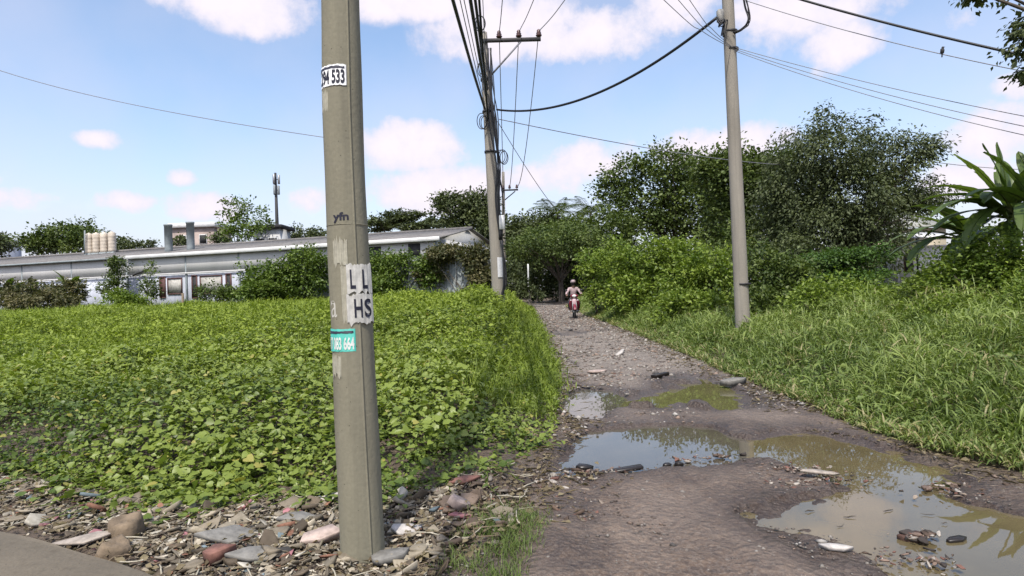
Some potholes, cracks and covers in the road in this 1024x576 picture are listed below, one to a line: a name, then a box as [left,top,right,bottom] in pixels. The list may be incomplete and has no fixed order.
pothole [543,422,748,473]
pothole [557,386,629,418]
pothole [732,425,1024,576]
pothole [627,371,762,411]
